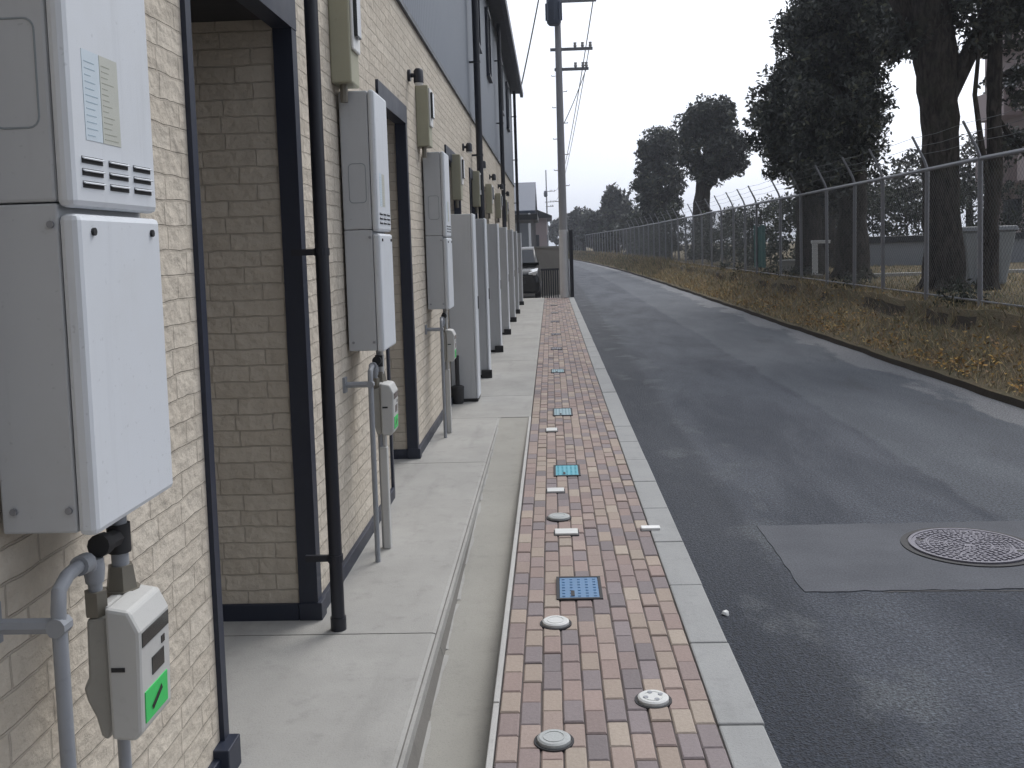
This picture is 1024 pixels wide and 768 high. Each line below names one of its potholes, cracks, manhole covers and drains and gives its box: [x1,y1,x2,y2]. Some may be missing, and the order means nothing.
manhole cover [900,527,1024,567]
